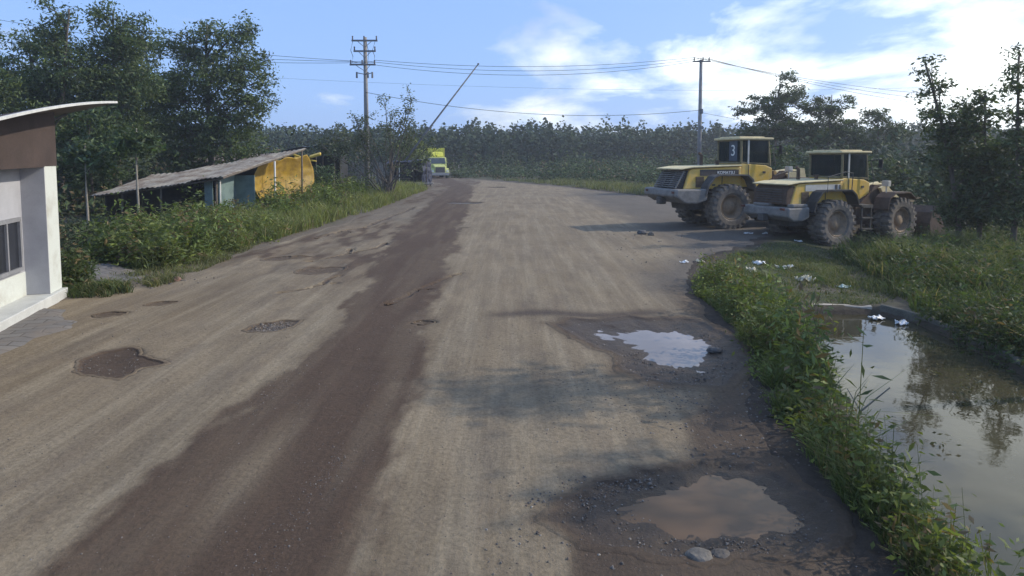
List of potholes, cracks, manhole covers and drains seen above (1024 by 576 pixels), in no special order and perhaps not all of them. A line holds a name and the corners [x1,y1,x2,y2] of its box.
pothole [293,266,348,275]
pothole [241,319,302,333]
pothole [71,346,171,380]
pothole [545,313,758,393]
pothole [534,456,857,568]
